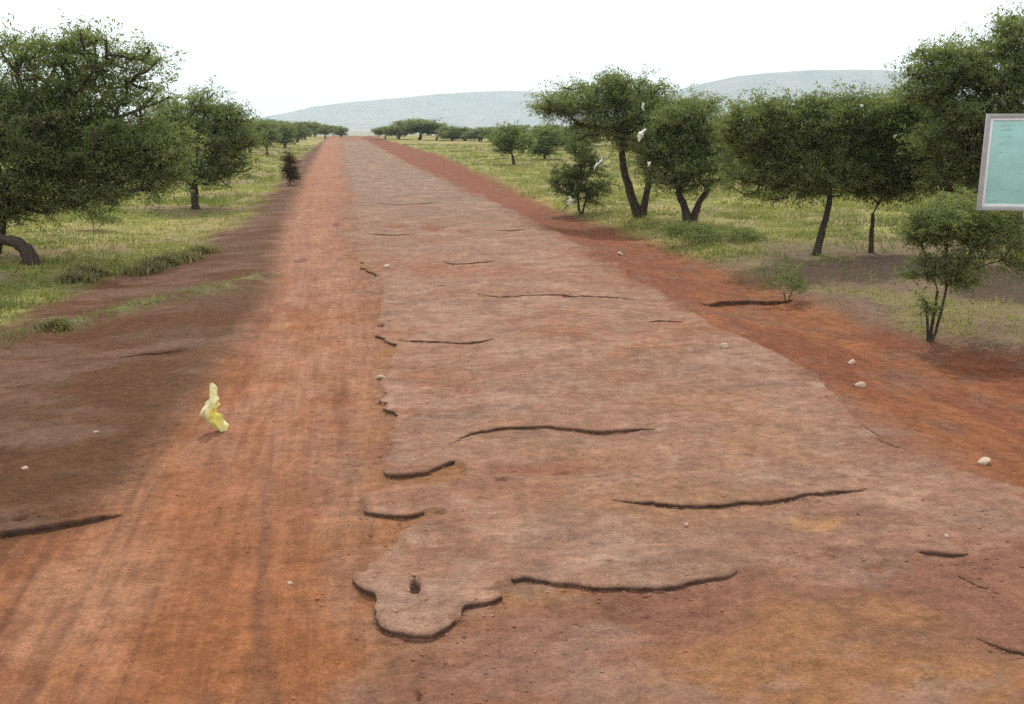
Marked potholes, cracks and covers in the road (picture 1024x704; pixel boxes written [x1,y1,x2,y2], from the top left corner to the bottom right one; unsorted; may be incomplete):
crack [918,548,968,557]
crack [383,424,656,479]
crack [375,335,493,346]
pothole [409,578,421,594]
crack [435,285,634,300]
crack [649,299,793,322]
crack [120,348,188,358]
crack [0,512,121,537]
crack [612,487,867,509]
crack [352,568,737,642]
